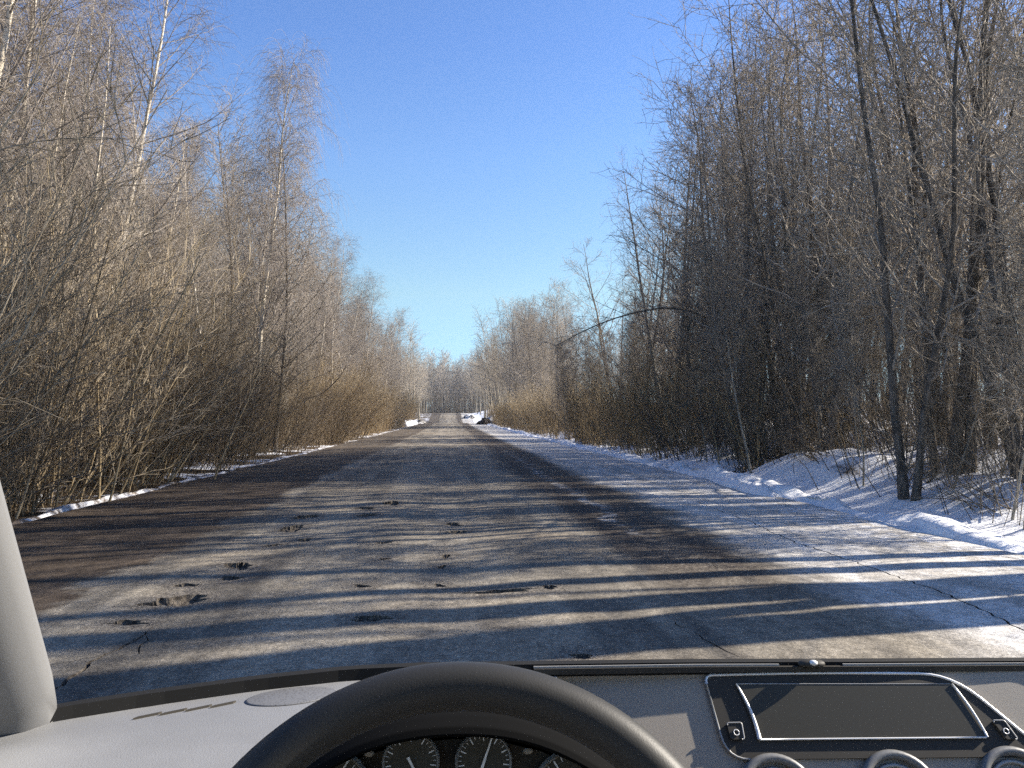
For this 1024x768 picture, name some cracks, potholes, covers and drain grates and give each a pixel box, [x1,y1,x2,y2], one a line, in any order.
crack [699,502,1024,631]
crack [55,629,152,690]
crack [676,624,737,656]
pothole [223,562,254,570]
pothole [135,594,210,607]
